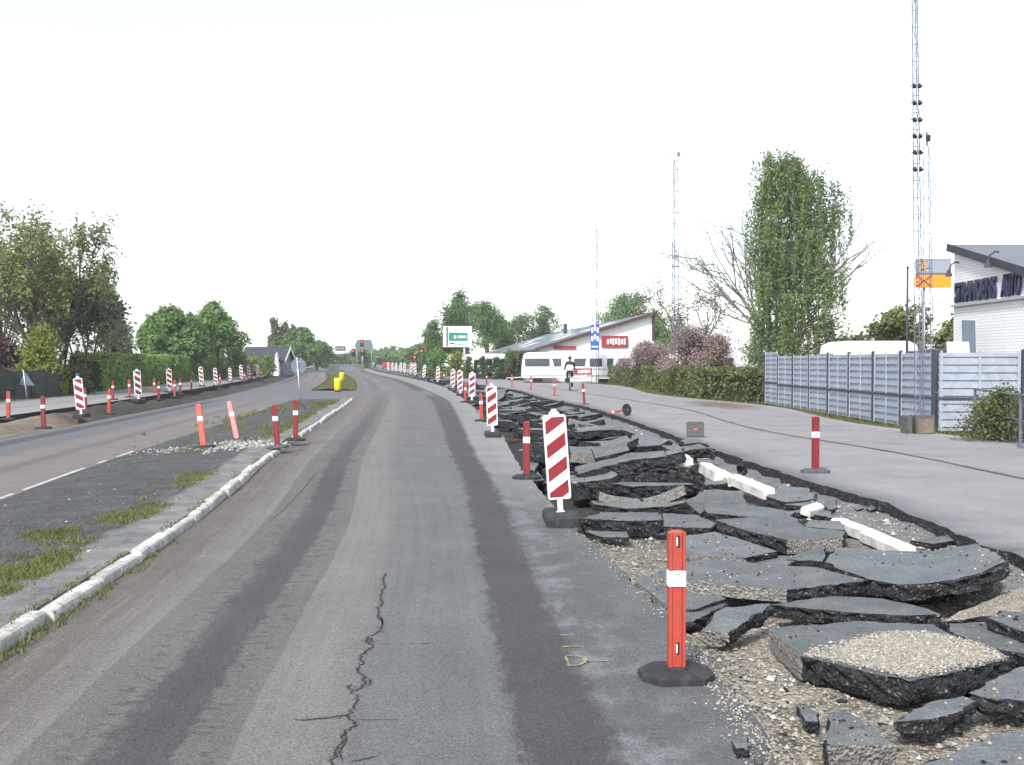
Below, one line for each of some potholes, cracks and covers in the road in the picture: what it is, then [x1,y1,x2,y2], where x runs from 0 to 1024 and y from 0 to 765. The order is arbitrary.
crack [292,573,422,765]
